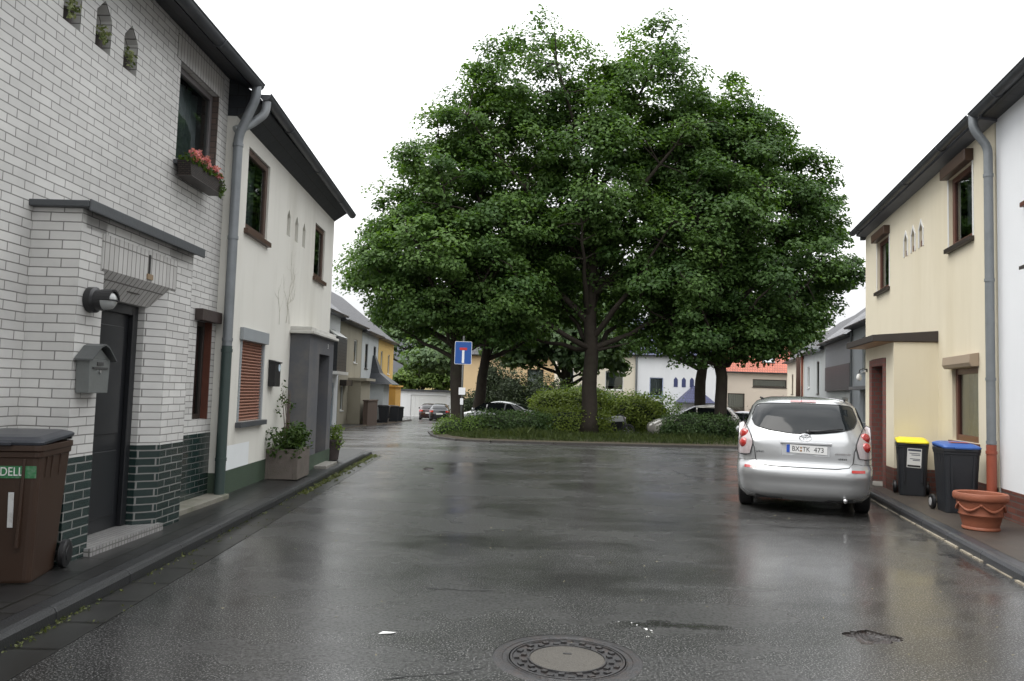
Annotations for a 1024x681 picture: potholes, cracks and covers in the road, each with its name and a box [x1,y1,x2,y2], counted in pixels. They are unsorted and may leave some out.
manhole cover [492,635,643,681]
pothole [842,630,903,645]
